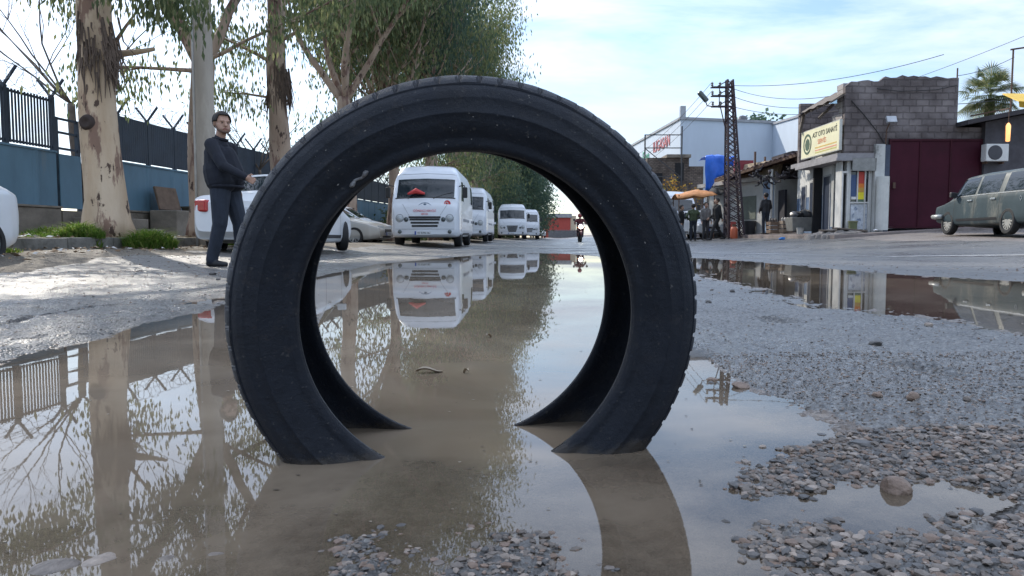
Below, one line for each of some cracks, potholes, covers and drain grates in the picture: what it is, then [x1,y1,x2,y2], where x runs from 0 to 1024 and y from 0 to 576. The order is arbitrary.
pothole [0,253,1001,576]
